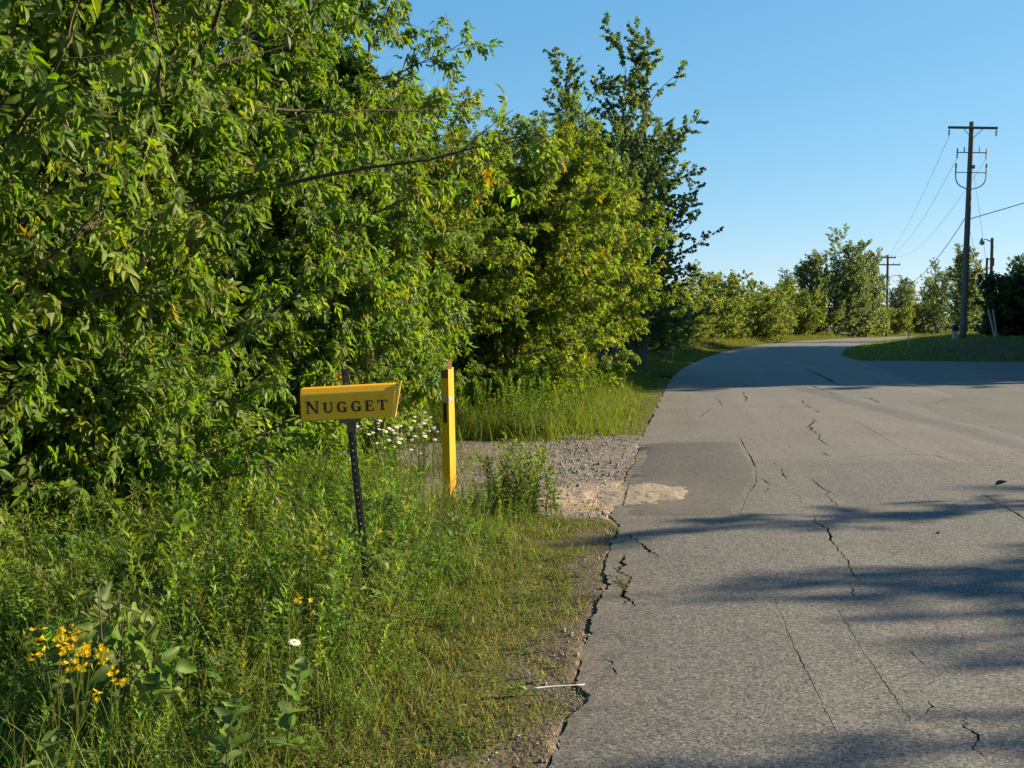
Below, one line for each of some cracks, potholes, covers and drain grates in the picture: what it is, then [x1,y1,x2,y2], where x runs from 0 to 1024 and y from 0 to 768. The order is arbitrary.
crack [609,535,662,606]
crack [801,368,1007,467]
crack [739,438,934,724]
crack [962,715,987,760]
